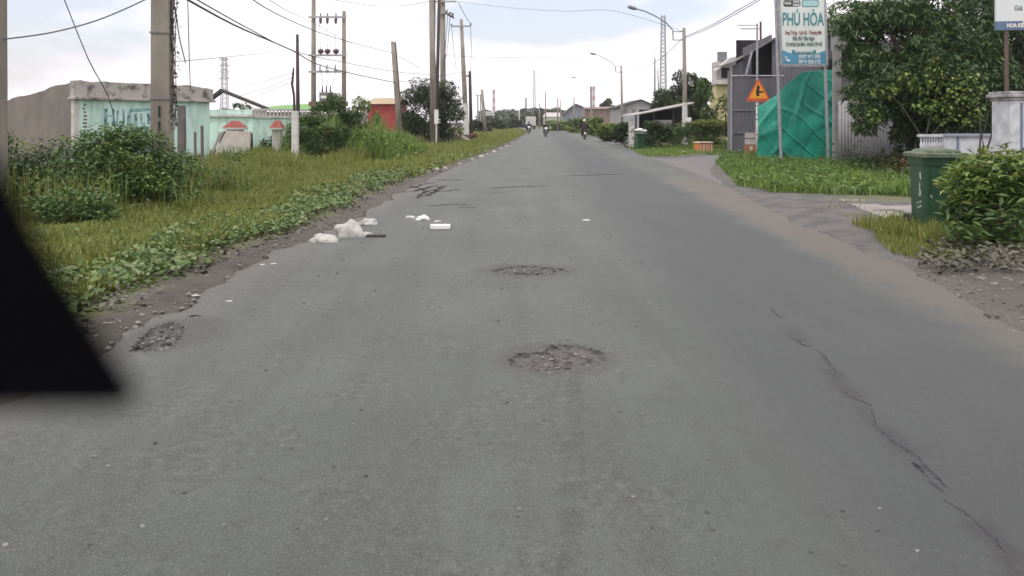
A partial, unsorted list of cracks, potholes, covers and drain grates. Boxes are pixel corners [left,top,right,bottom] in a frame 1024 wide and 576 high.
crack [770,308,1006,553]
pothole [491,265,567,276]
pothole [507,344,607,371]
crack [403,179,533,208]
pothole [129,321,186,353]
